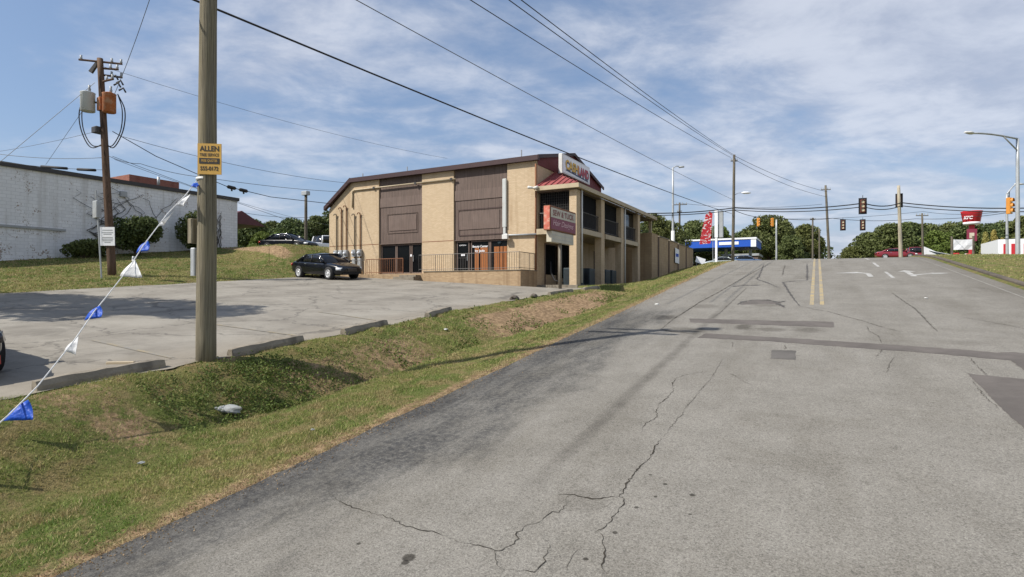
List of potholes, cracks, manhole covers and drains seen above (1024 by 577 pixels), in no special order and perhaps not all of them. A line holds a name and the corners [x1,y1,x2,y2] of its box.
crack [807,307,902,372]
crack [329,362,721,572]
